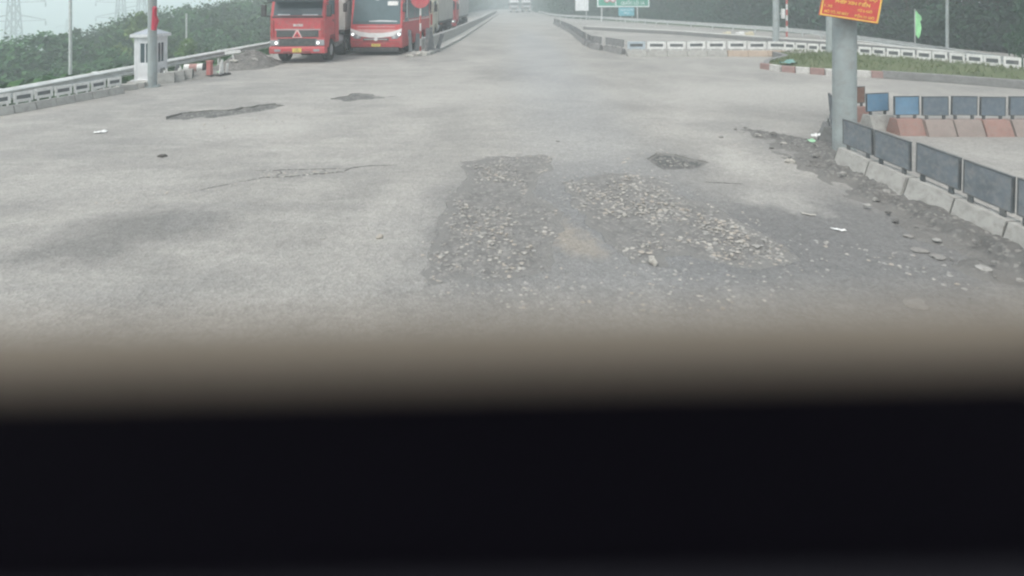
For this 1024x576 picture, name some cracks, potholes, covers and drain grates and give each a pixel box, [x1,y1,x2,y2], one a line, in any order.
pothole [331,93,385,101]
pothole [647,153,709,170]
crack [203,165,386,190]
pothole [166,103,285,120]
pothole [420,154,567,286]
pothole [562,172,802,271]
